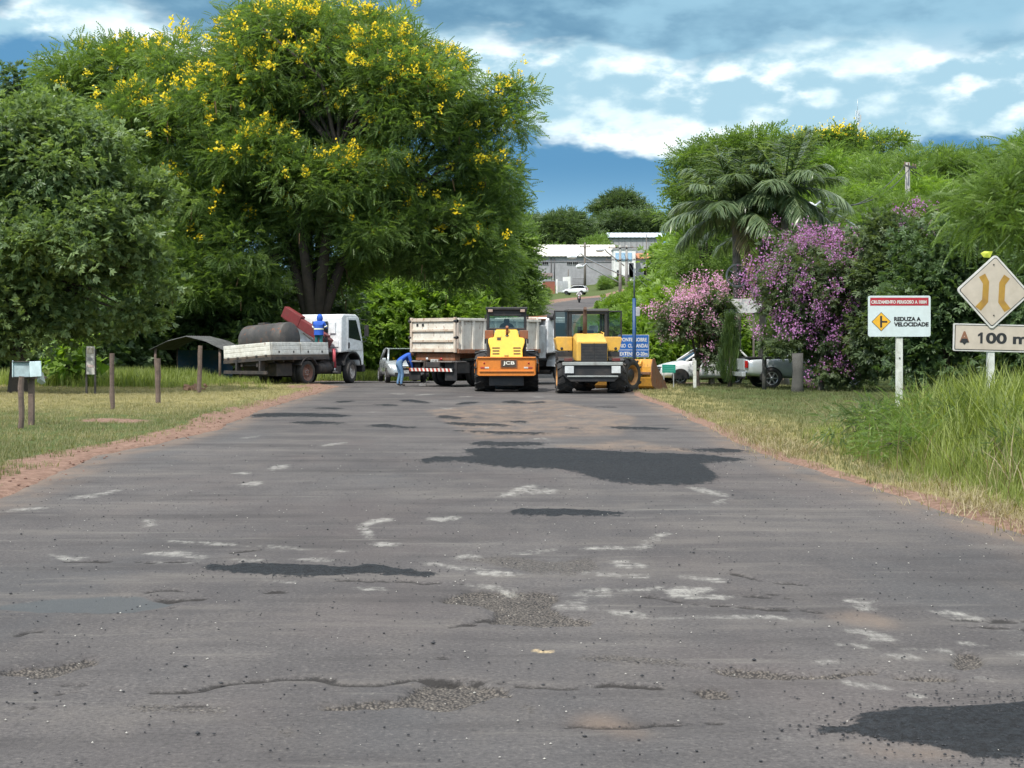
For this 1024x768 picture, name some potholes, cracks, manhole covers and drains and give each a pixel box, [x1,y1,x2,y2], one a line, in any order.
crack [13,656,668,715]
pothole [718,666,880,680]
pothole [949,652,983,670]
pothole [320,683,510,712]
pothole [0,657,104,680]
pothole [439,590,596,628]
